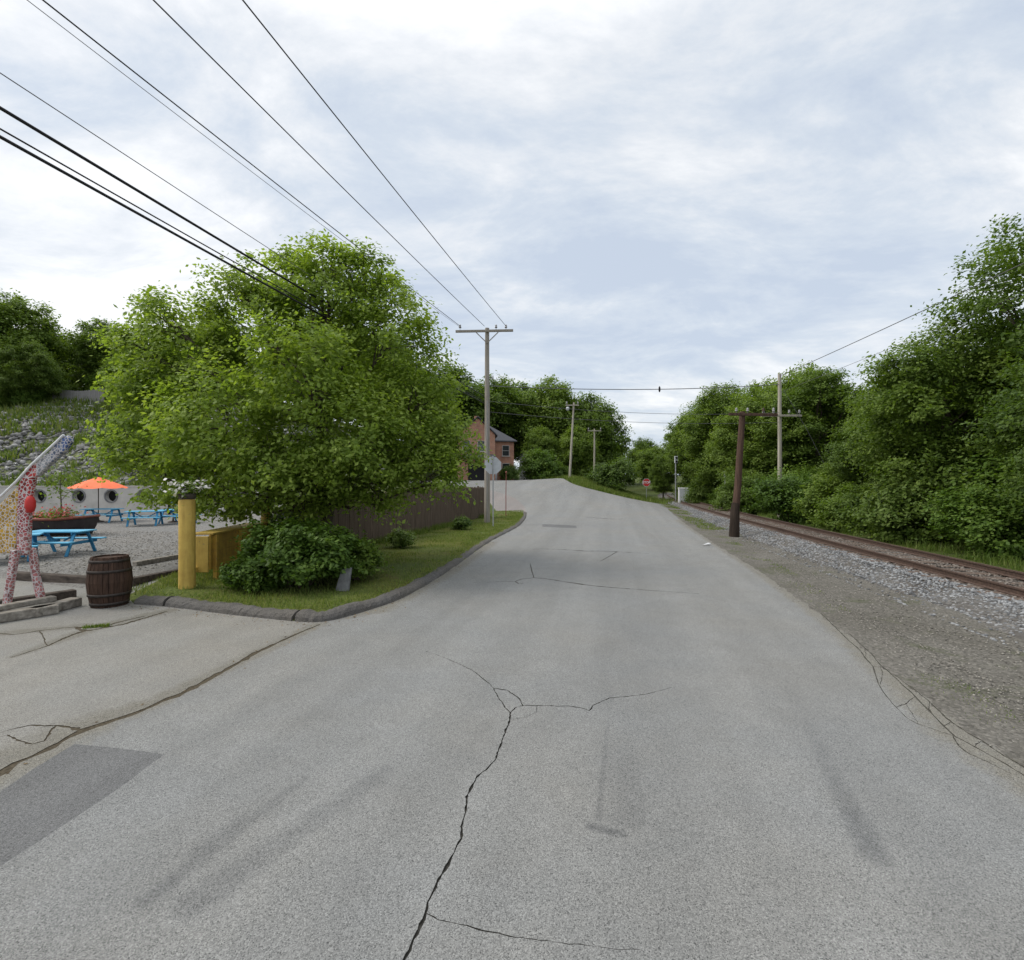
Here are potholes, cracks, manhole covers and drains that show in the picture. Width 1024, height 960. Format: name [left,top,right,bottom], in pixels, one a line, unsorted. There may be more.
crack [508,564,699,594]
crack [0,611,321,776]
crack [821,614,1024,776]
crack [403,651,668,960]
